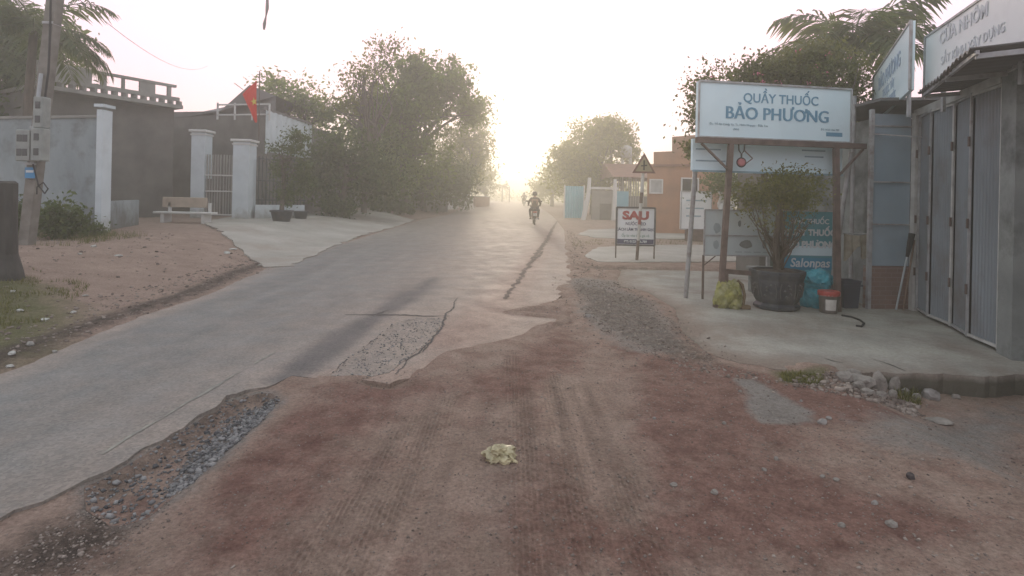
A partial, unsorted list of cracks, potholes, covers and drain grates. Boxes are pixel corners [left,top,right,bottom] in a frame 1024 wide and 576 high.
pothole [84,392,282,527]
pothole [331,318,443,378]
crack [345,297,458,374]
crack [503,221,557,299]
